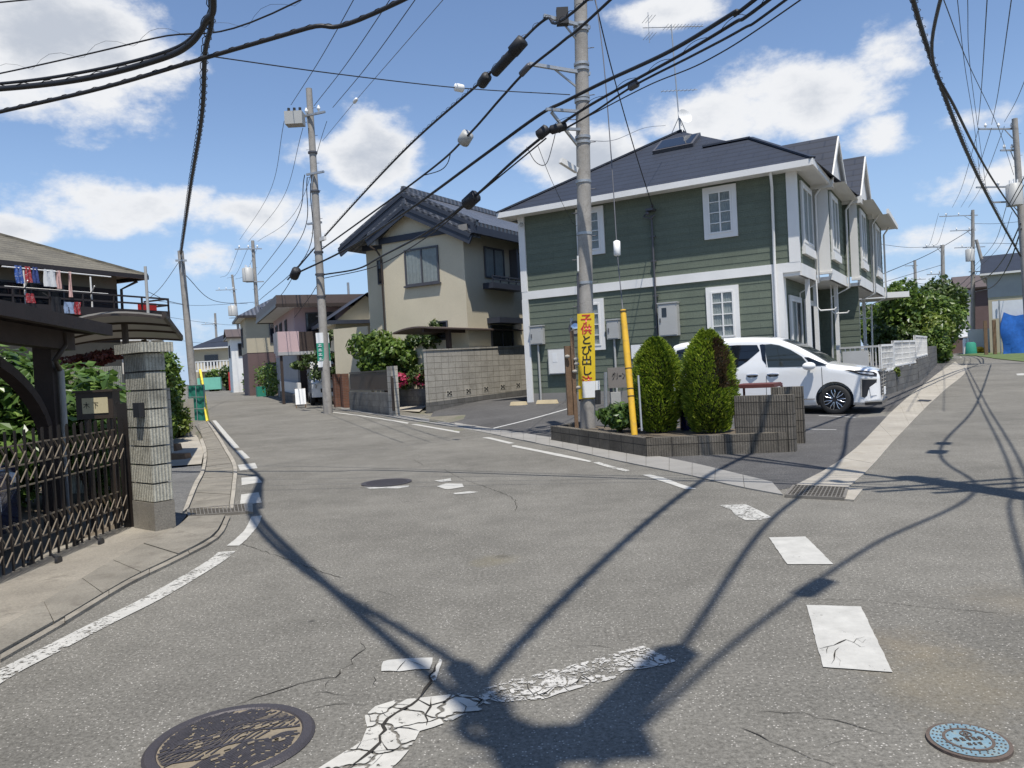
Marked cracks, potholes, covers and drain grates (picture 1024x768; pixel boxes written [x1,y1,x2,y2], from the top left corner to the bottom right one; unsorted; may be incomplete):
manhole cover [361,478,412,487]
manhole cover [926,722,1014,763]
manhole cover [141,703,316,768]
crack [743,711,904,764]
drain grate [784,484,849,501]
drain grate [187,503,248,516]
